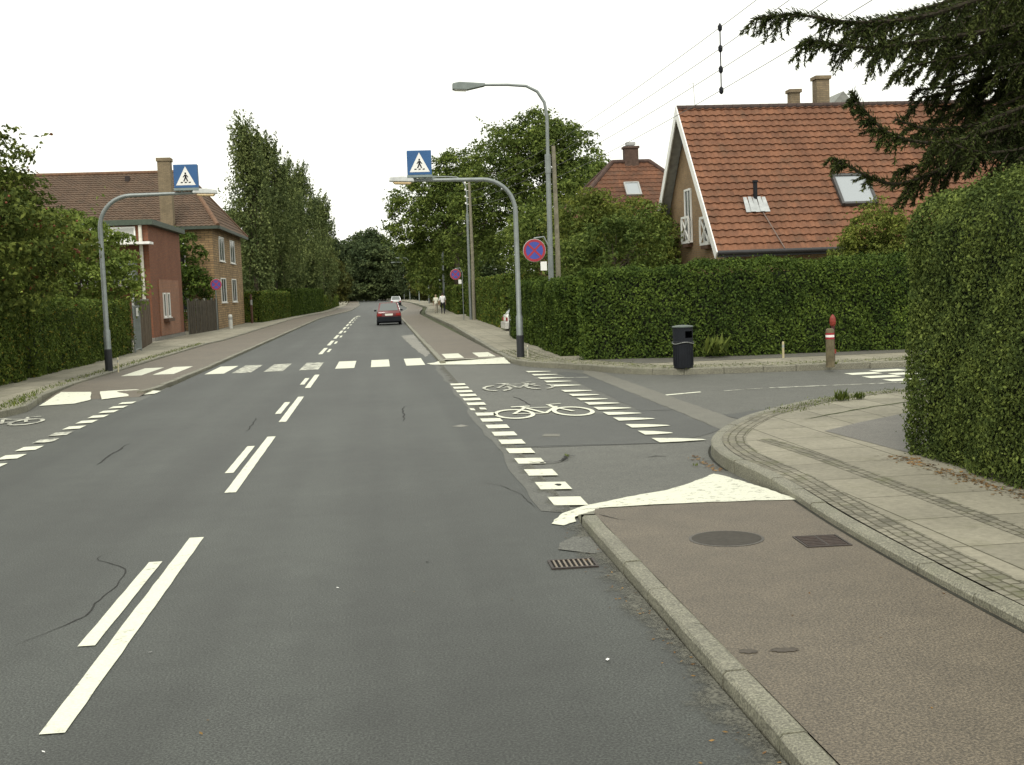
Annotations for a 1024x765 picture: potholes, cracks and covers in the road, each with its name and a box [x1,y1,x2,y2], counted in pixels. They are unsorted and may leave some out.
drain grate [547,557,599,570]
crack [20,552,126,643]
manhole cover [689,531,764,547]
